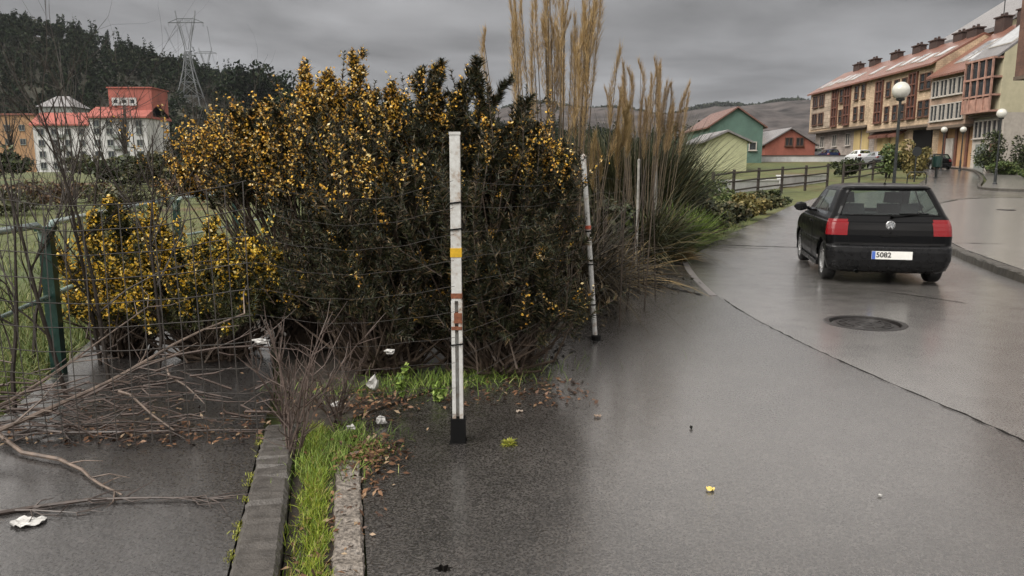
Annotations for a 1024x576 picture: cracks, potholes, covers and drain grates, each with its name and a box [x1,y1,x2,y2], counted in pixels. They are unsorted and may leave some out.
manhole cover [823,315,909,331]
